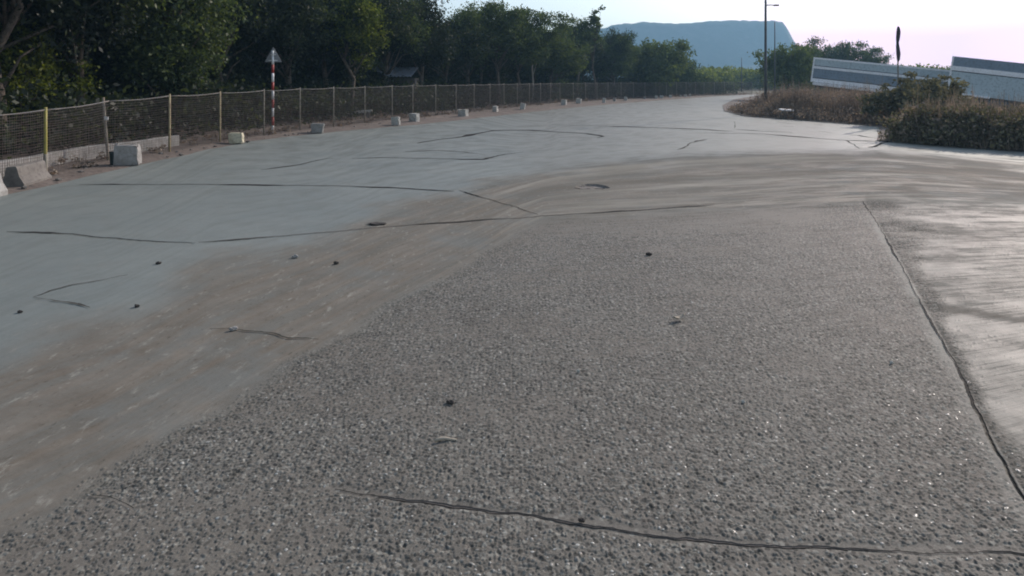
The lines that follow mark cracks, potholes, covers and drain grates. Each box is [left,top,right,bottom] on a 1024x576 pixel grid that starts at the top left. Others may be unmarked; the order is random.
crack [34,274,128,307]
crack [375,122,888,160]
crack [82,158,704,242]
crack [7,231,189,243]
crack [210,328,314,339]
